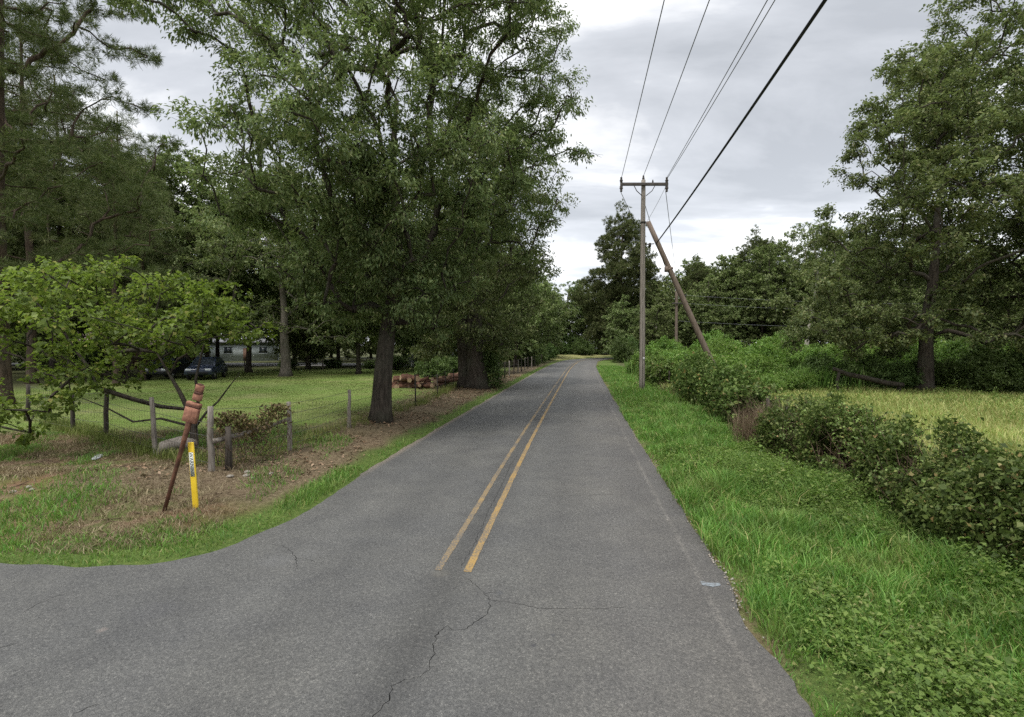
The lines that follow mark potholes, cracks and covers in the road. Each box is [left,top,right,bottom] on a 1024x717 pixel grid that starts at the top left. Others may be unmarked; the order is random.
crack [372,578,622,717]
